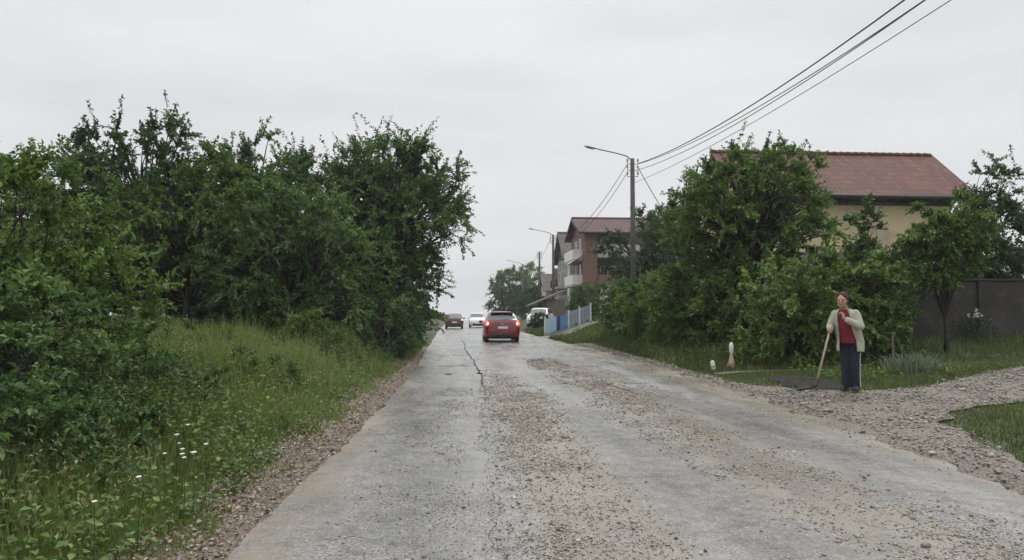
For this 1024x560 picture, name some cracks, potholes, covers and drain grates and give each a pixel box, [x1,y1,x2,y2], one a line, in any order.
crack [461,340,489,402]
